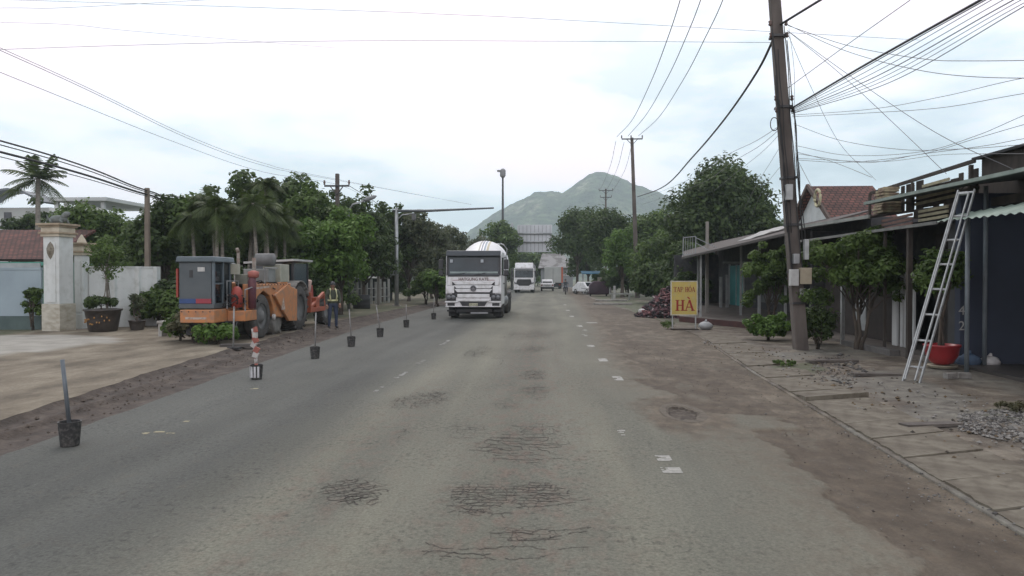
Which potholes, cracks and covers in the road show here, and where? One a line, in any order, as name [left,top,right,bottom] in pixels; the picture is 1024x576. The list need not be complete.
crack [318,478,388,505]
pothole [659,403,708,422]
crack [466,320,548,408]
crack [456,423,570,463]
crack [422,482,590,560]
